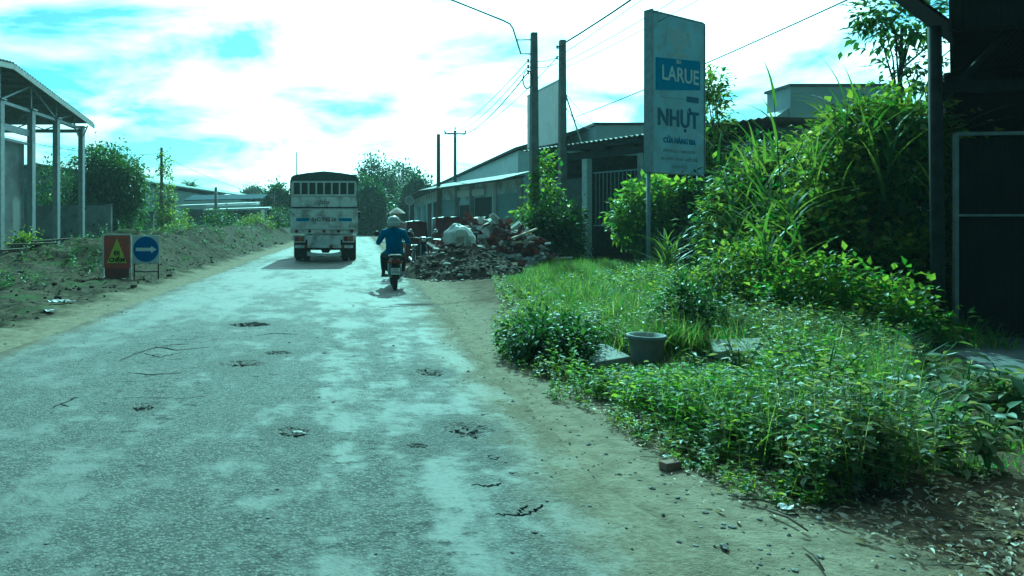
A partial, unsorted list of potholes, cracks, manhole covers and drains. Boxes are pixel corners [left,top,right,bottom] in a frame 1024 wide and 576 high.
pothole [216,360,269,368]
pothole [414,368,446,376]
crack [496,504,543,516]
pothole [275,427,311,438]
pothole [125,403,155,413]
crack [119,344,207,375]
pothole [444,421,496,440]
